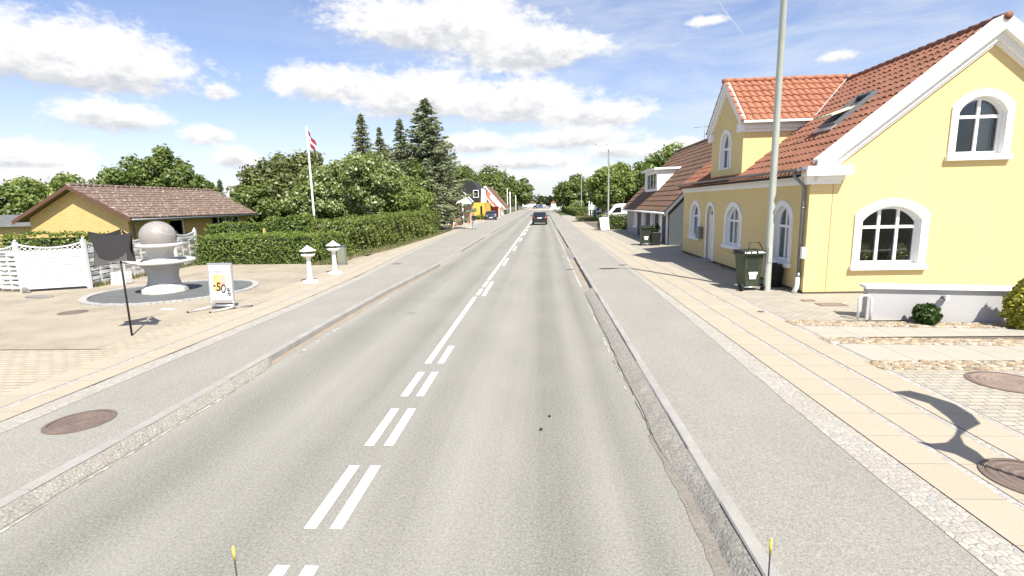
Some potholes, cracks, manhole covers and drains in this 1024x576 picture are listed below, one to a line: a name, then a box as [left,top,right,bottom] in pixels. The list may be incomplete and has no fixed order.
manhole cover [978,458,1024,494]
manhole cover [41,409,118,435]
manhole cover [964,371,1024,394]
